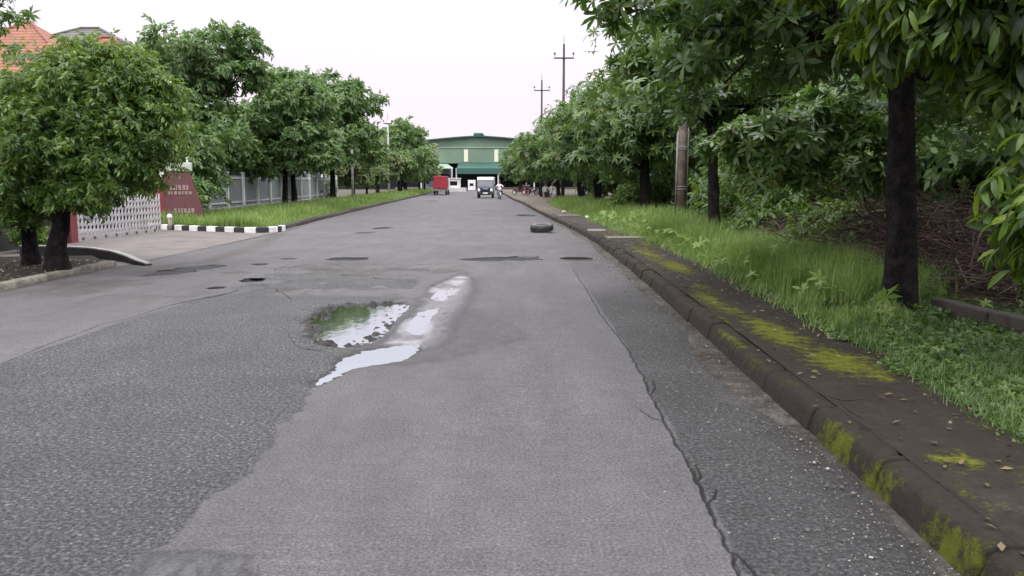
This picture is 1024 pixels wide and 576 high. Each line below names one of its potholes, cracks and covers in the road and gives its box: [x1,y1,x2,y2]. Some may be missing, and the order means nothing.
pothole [215,275,287,285]
pothole [276,273,483,394]
pothole [435,254,561,263]
crack [558,267,878,576]
pothole [183,284,249,292]
